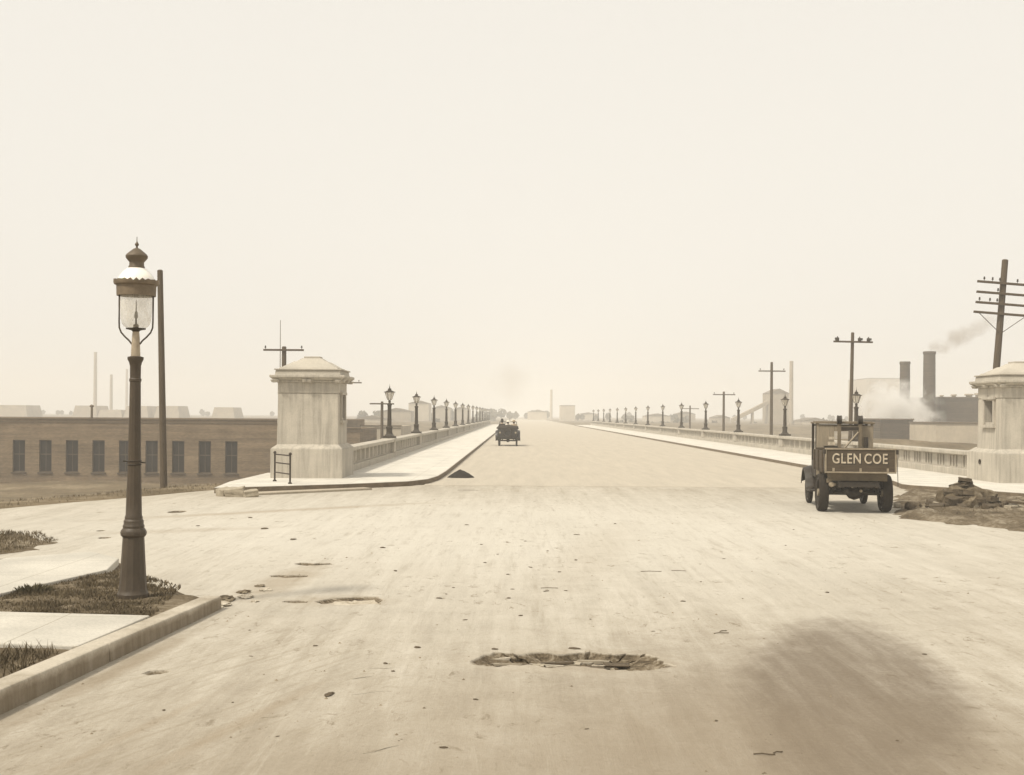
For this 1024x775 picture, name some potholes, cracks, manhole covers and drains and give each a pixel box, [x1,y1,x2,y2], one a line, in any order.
pothole [314,596,383,605]
pothole [470,651,676,671]
